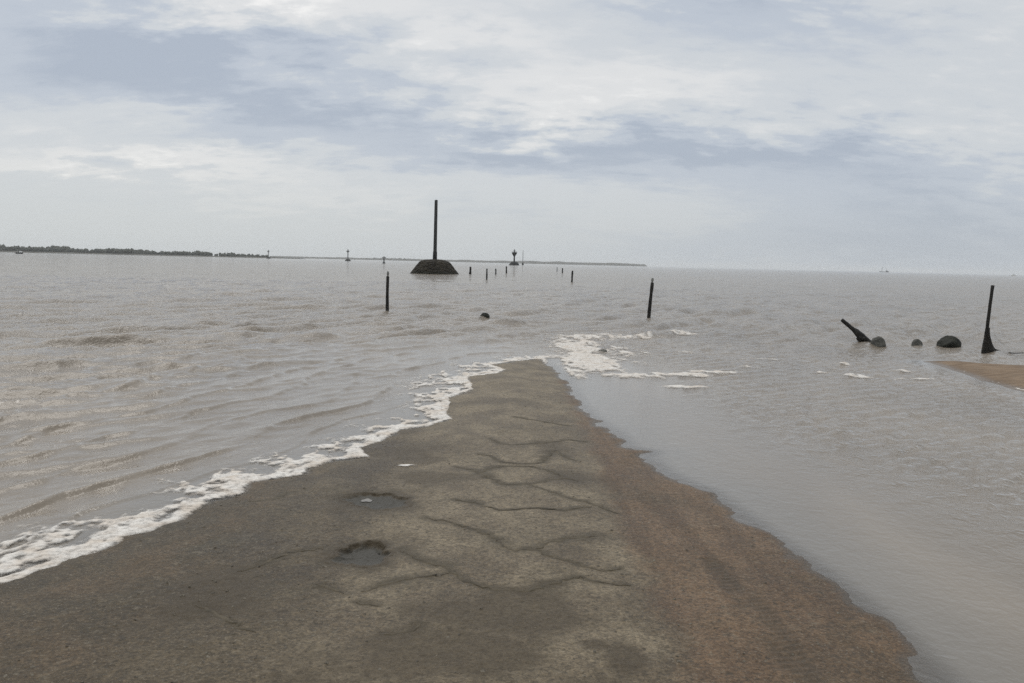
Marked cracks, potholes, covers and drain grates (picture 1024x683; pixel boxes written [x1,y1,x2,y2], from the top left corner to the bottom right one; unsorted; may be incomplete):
crack [316,416,631,606]
pothole [335,491,414,511]
pothole [323,539,396,568]
